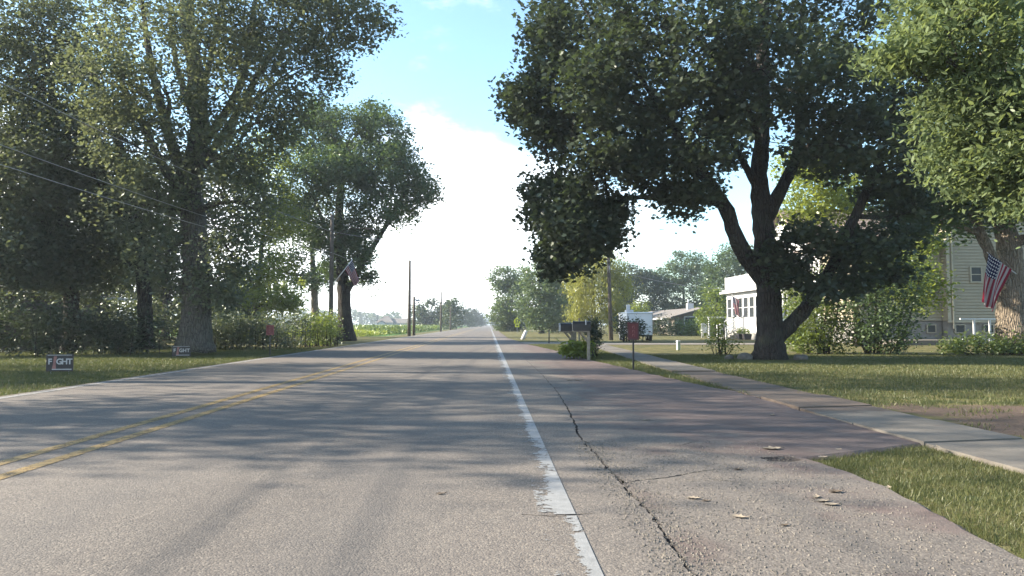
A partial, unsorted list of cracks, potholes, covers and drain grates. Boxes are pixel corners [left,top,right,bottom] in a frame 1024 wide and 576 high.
crack [524,358,744,576]
